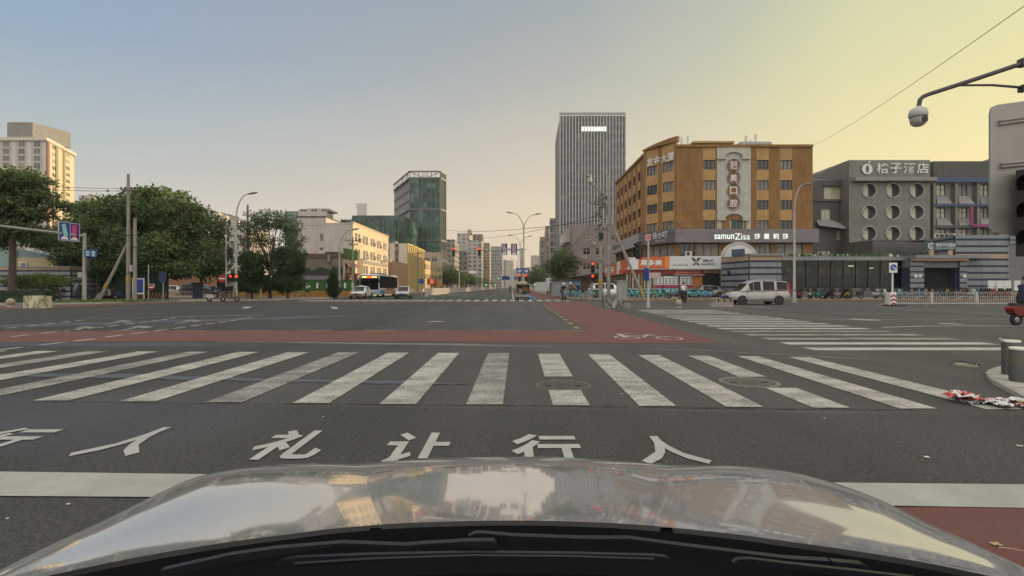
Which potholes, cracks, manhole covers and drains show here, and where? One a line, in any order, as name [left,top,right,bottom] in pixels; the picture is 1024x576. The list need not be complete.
manhole cover [719,377,781,388]
manhole cover [536,380,591,390]
